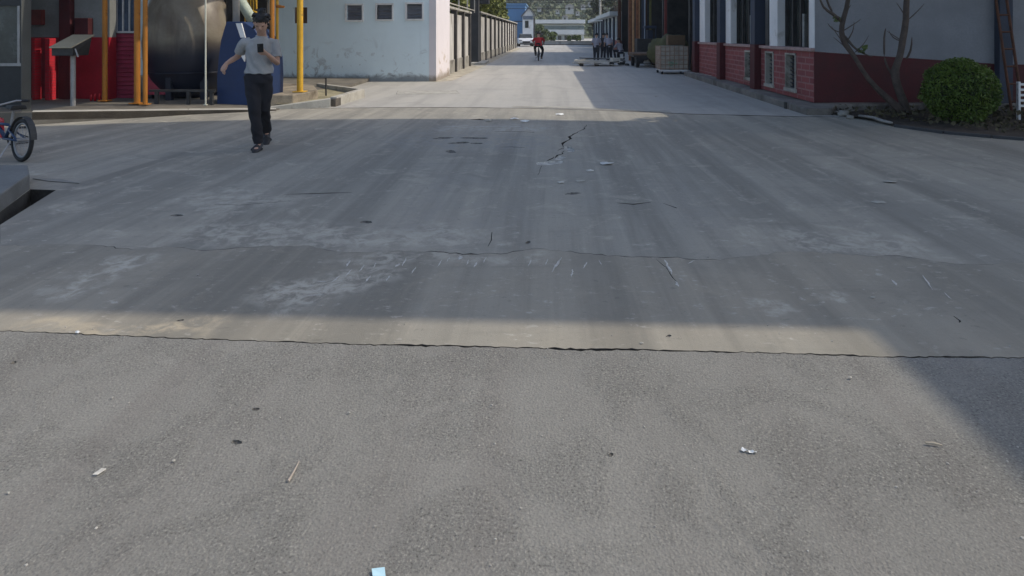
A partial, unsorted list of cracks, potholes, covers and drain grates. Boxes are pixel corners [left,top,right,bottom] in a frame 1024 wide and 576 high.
crack [101,234,985,282]
crack [539,125,587,173]
